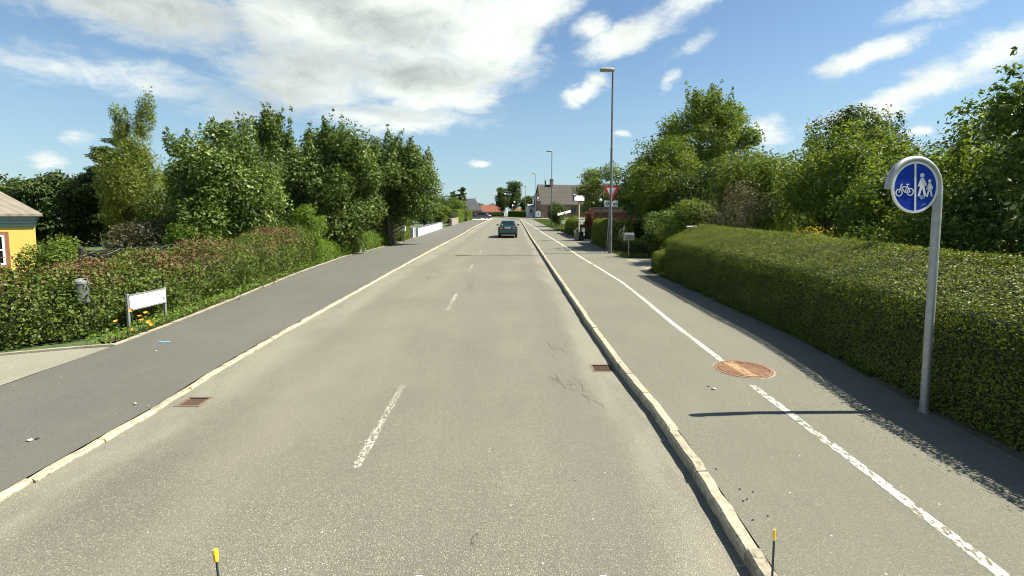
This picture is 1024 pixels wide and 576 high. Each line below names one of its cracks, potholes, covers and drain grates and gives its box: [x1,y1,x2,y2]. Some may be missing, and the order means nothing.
drain grate [173,397,213,407]
drain grate [590,364,617,372]
manhole cover [713,360,776,379]
crack [533,341,603,406]
